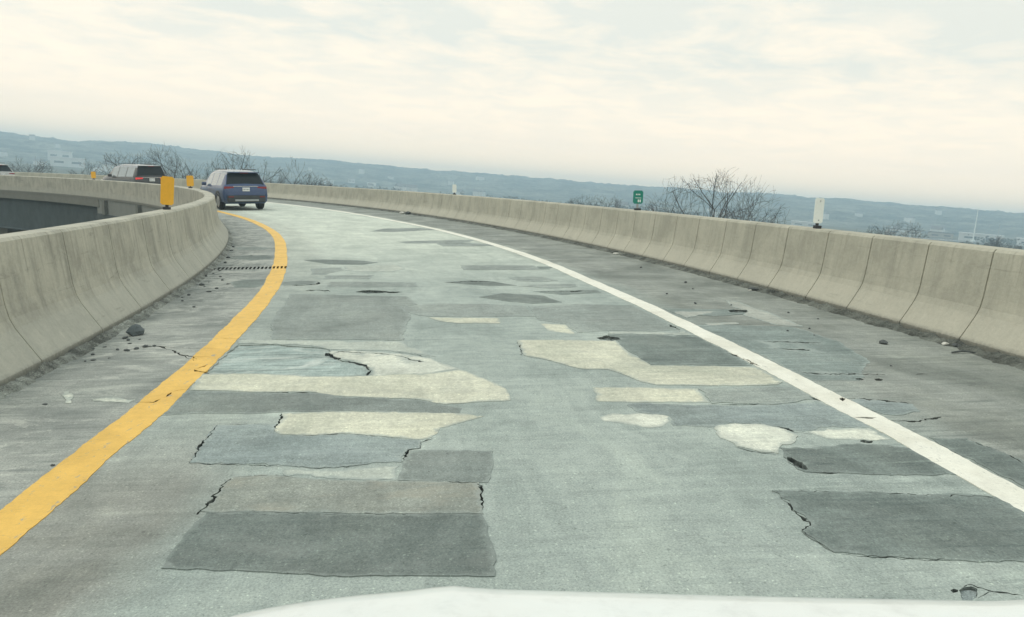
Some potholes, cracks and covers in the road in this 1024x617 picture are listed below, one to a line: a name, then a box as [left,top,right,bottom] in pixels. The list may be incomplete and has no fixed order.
crack [190,434,347,515]
pothole [960,586,977,601]
